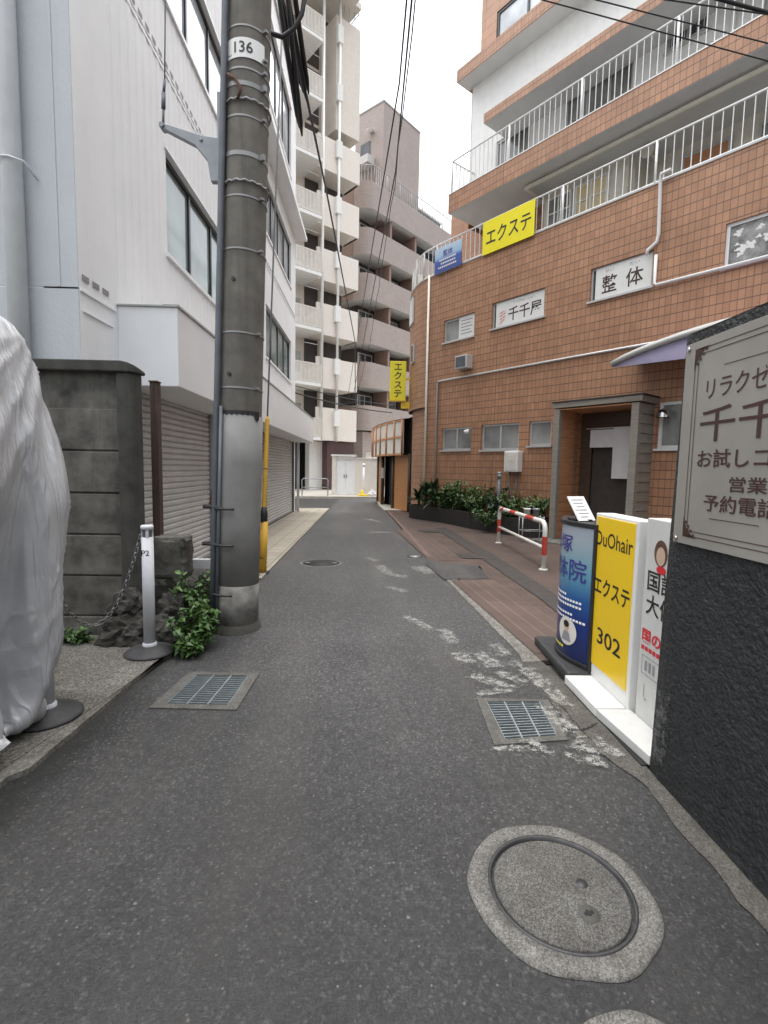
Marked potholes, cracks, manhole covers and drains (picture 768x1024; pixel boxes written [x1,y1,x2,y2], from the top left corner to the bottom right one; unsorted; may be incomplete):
manhole cover [467,825,665,983]
drain grate [149,671,260,711]
manhole cover [584,1010,665,1024]
manhole cover [299,559,343,567]
drain grate [476,698,568,746]
